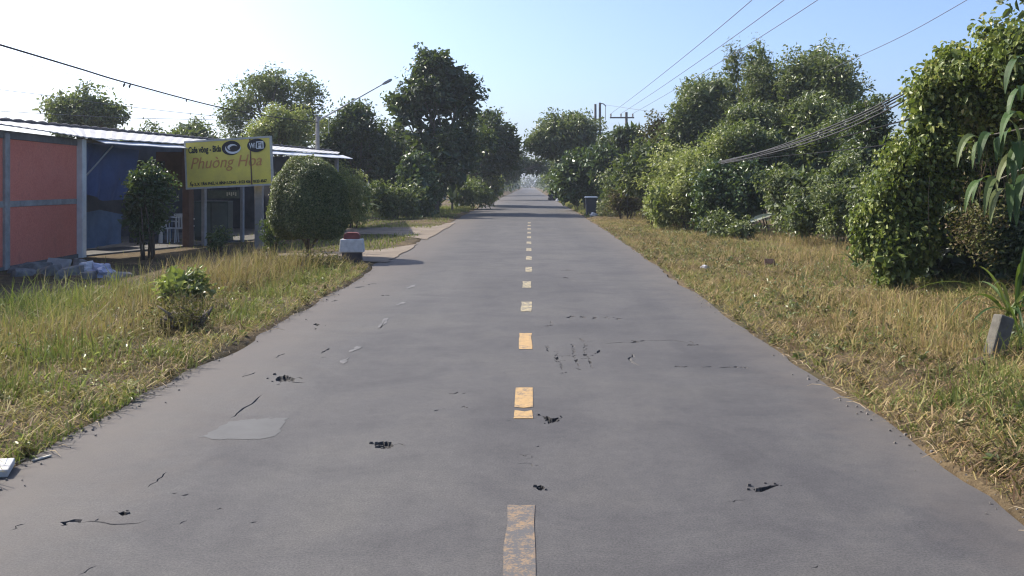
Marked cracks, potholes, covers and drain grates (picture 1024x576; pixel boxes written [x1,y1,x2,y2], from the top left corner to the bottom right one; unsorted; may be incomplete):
pothole [369,441,406,449]
pothole [747,482,782,492]
pothole [266,373,305,385]
crack [546,338,698,374]
